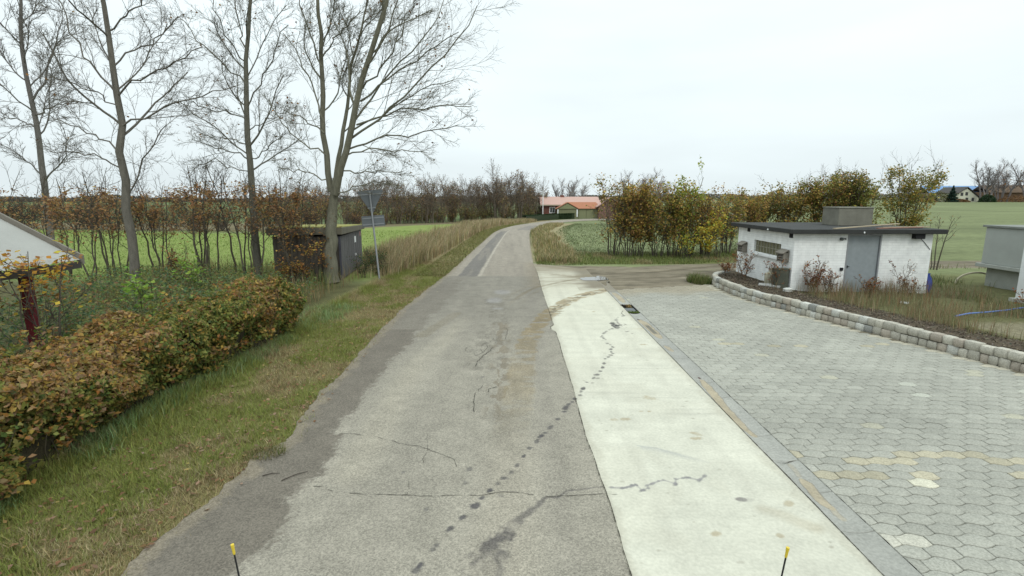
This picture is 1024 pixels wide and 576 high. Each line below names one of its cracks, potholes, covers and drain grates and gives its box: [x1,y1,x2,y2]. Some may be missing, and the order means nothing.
crack [322,486,603,496]
